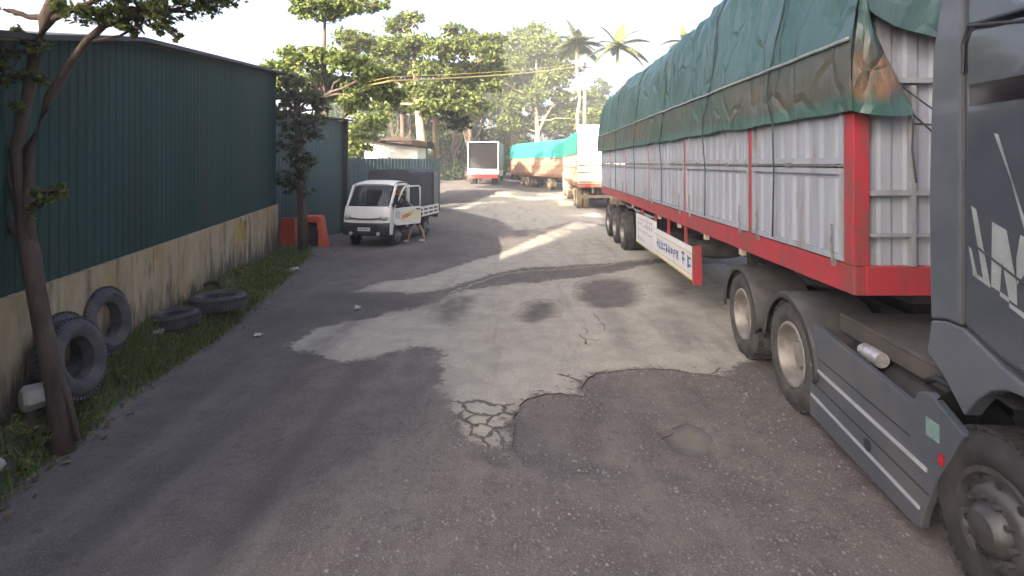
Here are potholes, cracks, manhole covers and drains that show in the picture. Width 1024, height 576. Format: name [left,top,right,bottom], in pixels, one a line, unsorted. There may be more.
crack [450,399,516,467]
crack [579,313,605,346]
pothole [512,368,751,485]
